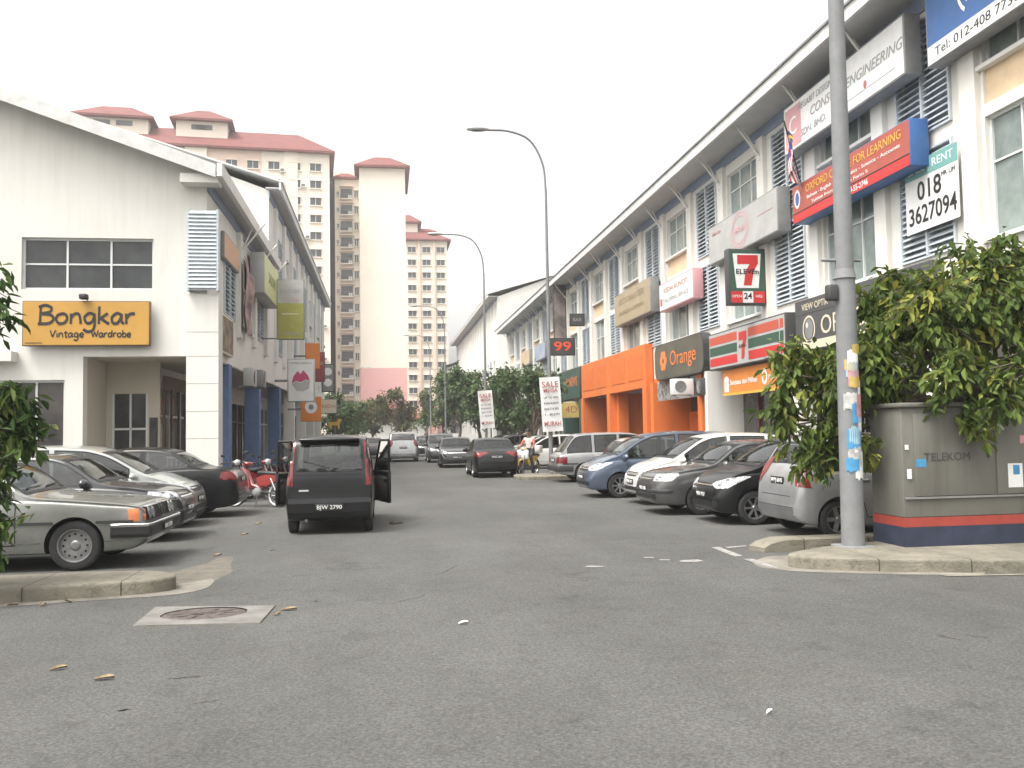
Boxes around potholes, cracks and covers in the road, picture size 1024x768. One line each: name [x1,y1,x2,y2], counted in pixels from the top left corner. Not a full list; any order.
manhole cover [133,605,275,627]
